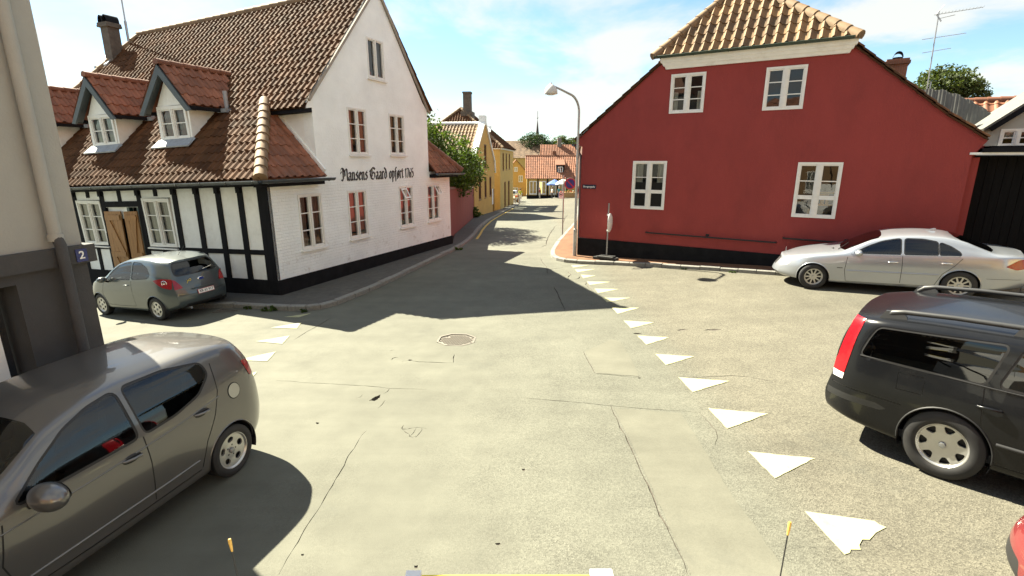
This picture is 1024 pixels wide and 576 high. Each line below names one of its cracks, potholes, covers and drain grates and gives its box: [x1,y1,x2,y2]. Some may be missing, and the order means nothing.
crack [518,397,718,574]
manhole cover [436,333,476,346]
crack [280,431,366,572]
crack [541,216,593,309]
